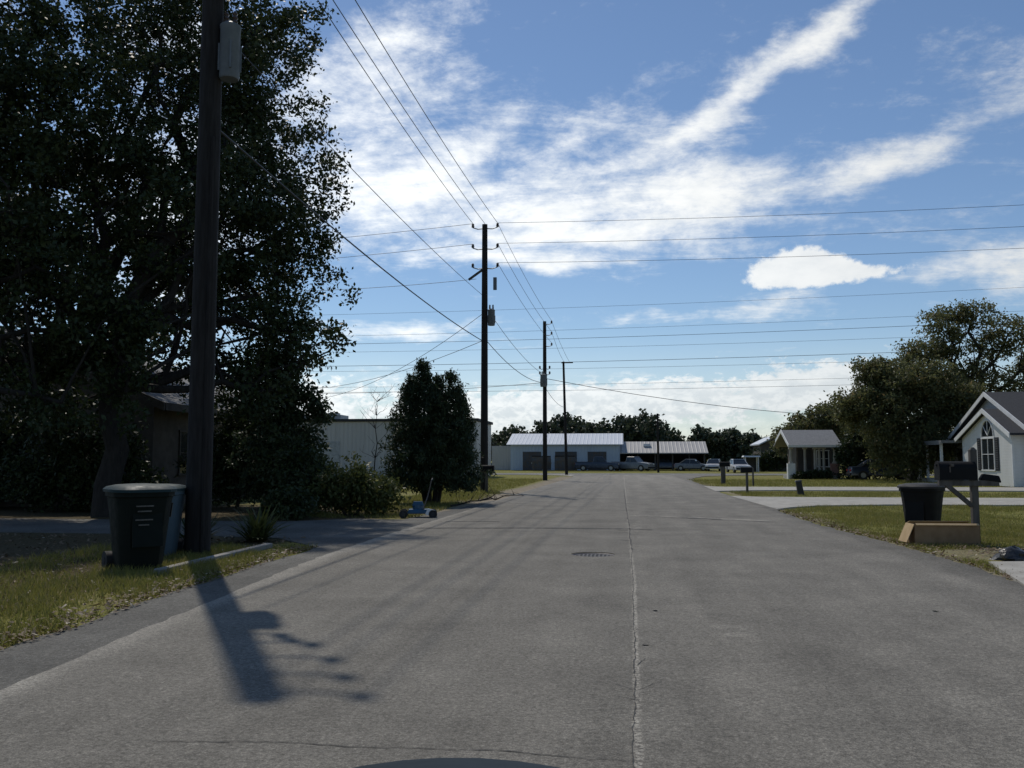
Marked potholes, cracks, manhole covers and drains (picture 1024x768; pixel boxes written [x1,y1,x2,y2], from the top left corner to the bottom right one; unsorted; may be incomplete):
crack [152,740,625,761]
crack [447,491,765,768]
